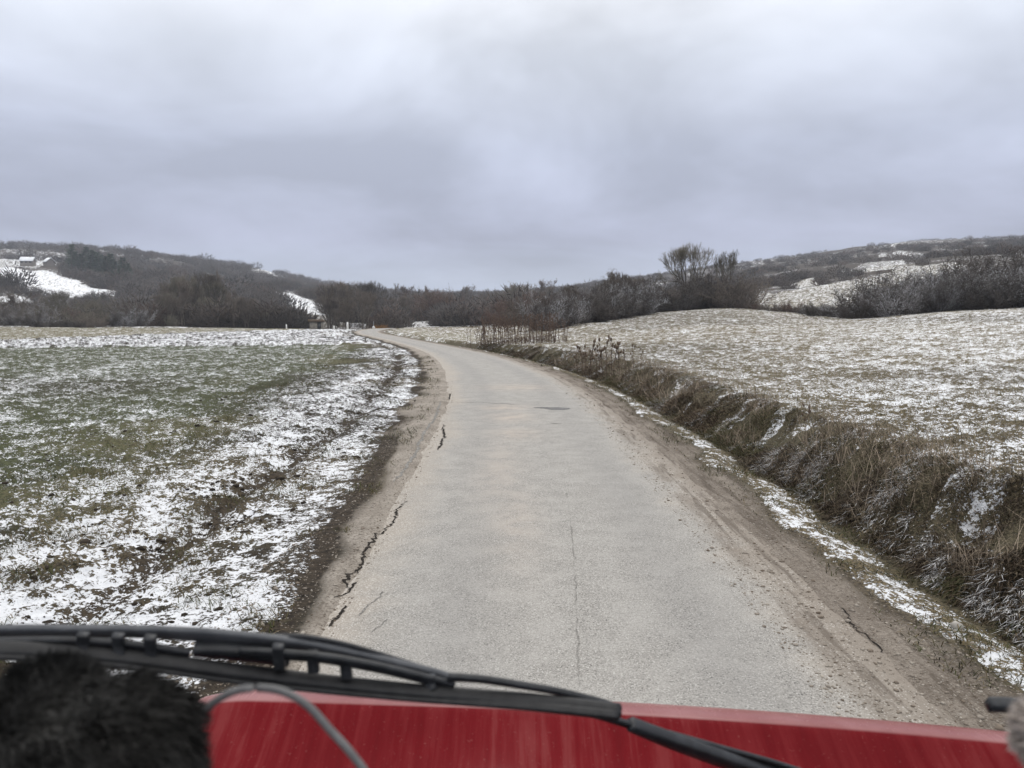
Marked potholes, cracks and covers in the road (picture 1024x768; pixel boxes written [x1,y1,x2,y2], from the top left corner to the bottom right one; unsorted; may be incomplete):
crack [394,393,506,481]
crack [841,607,883,653]
crack [329,501,407,631]
